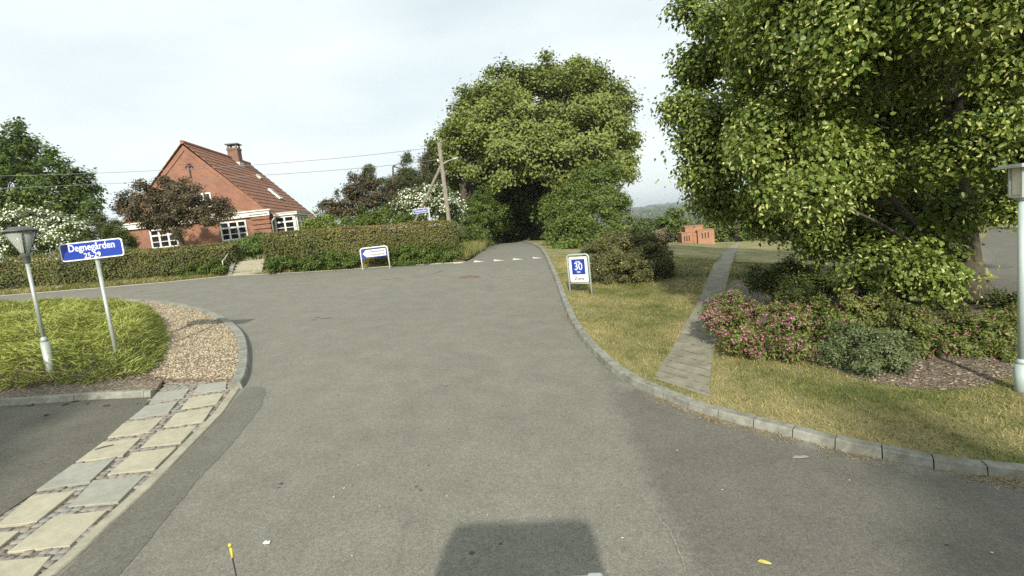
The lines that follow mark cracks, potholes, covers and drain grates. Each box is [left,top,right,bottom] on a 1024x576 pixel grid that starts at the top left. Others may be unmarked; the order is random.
crack [658,516,687,576]
